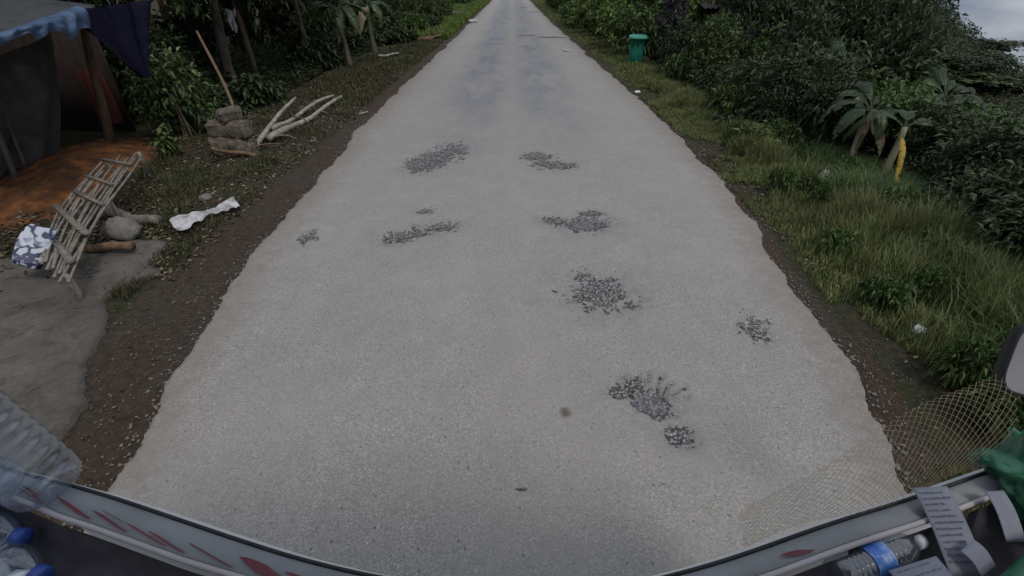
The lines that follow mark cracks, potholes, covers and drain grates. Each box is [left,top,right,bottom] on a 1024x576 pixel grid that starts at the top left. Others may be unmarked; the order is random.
pothole [552,266,641,325]
pothole [531,210,619,236]
pothole [297,229,319,247]
pothole [382,220,457,246]
pothole [396,141,474,175]
pothole [518,150,591,171]
pothole [608,375,695,448]
pothole [736,309,776,348]
